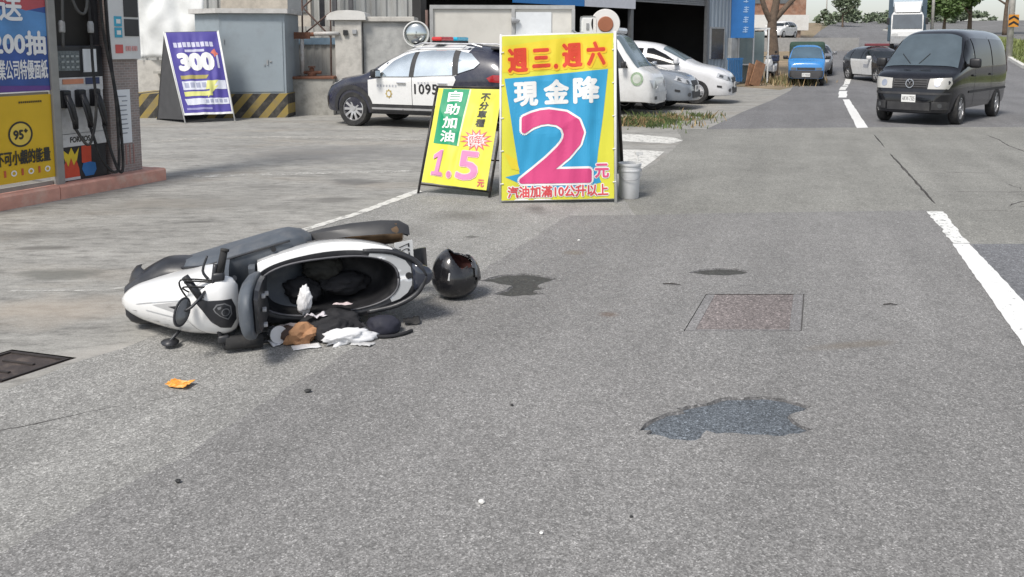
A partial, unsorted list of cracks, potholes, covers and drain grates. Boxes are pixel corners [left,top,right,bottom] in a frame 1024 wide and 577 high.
crack [874,135,1024,211]
manhole cover [685,294,804,331]
manhole cover [0,350,72,383]
